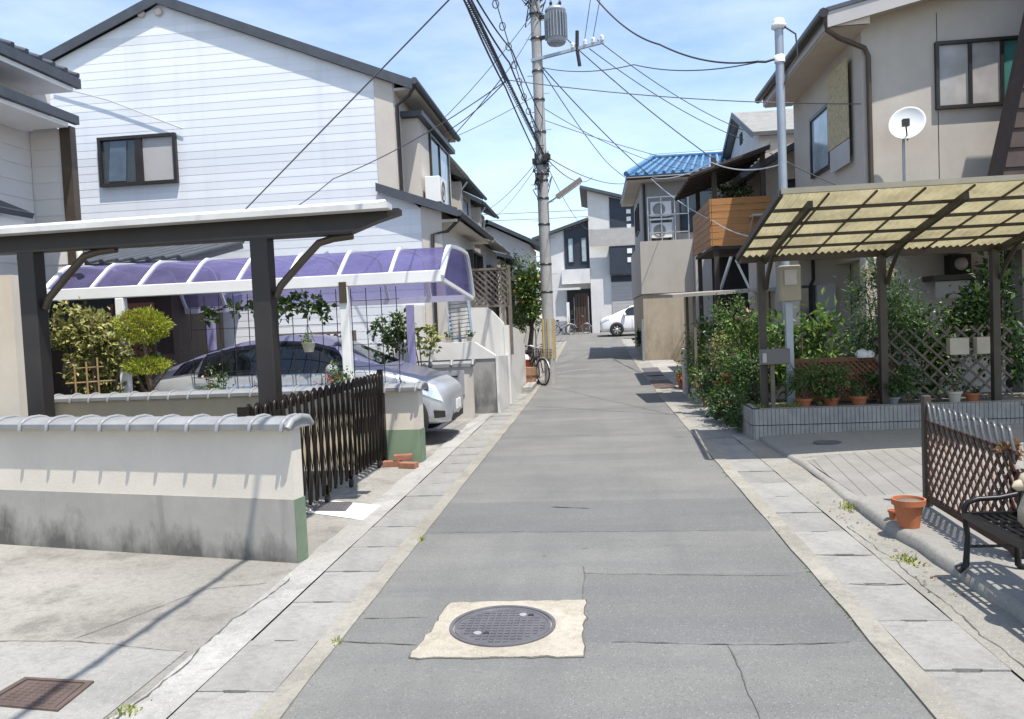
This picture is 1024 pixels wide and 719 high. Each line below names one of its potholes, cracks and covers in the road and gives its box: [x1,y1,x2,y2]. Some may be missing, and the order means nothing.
manhole cover [408,600,588,659]
crack [611,641,850,718]
